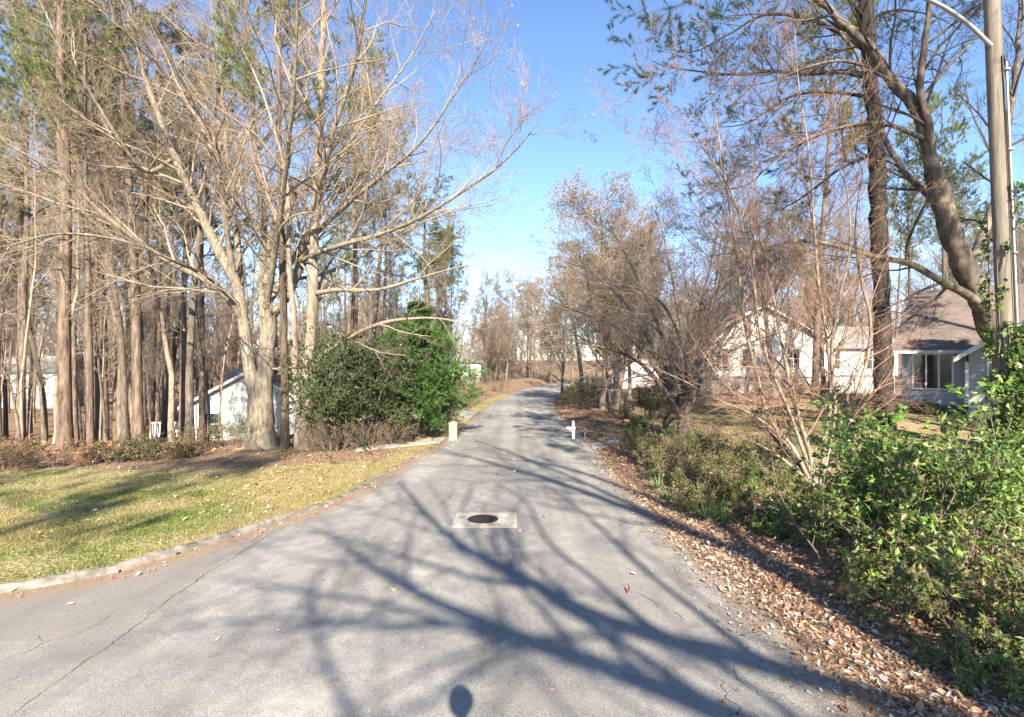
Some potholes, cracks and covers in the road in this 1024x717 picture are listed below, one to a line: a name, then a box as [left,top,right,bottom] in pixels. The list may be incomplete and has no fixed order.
manhole cover [452,513,517,527]
crack [721,665,758,716]
crack [0,534,271,717]
